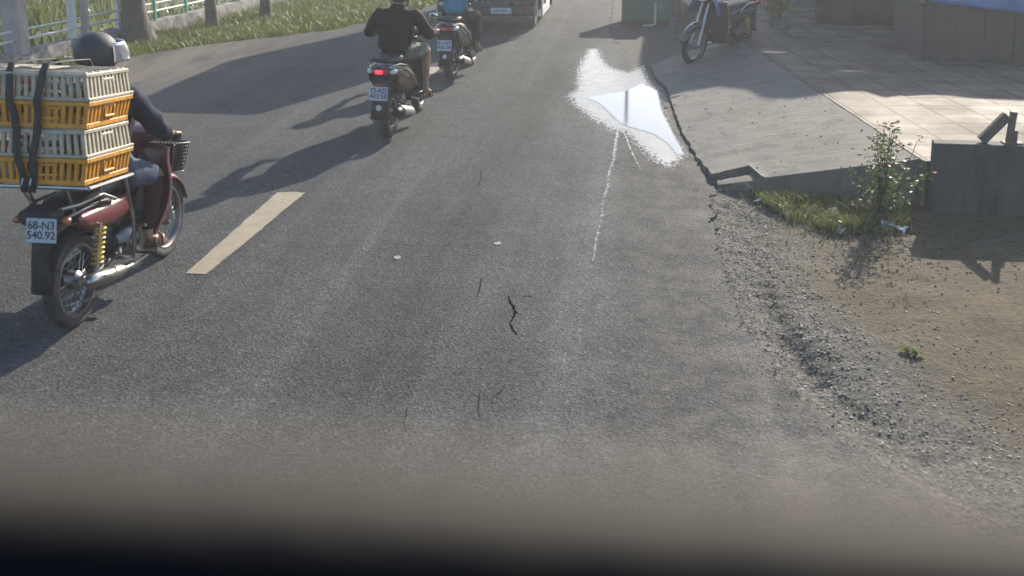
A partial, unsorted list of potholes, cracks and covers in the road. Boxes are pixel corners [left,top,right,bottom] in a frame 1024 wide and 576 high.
crack [508,296,521,335]
